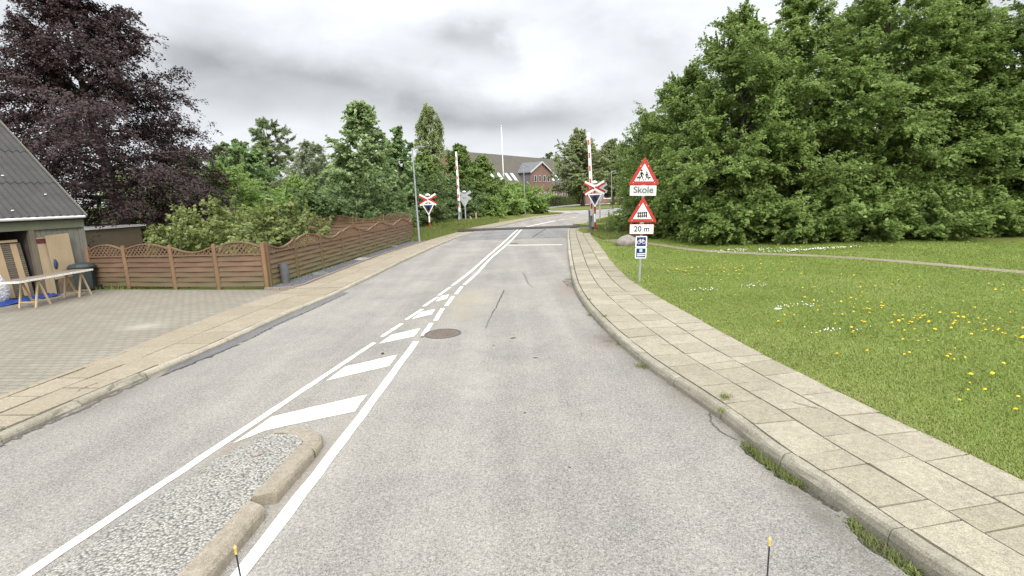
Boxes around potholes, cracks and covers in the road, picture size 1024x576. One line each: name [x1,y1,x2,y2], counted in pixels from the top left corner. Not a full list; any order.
manhole cover [424,329,461,339]
crack [709,412,737,440]
